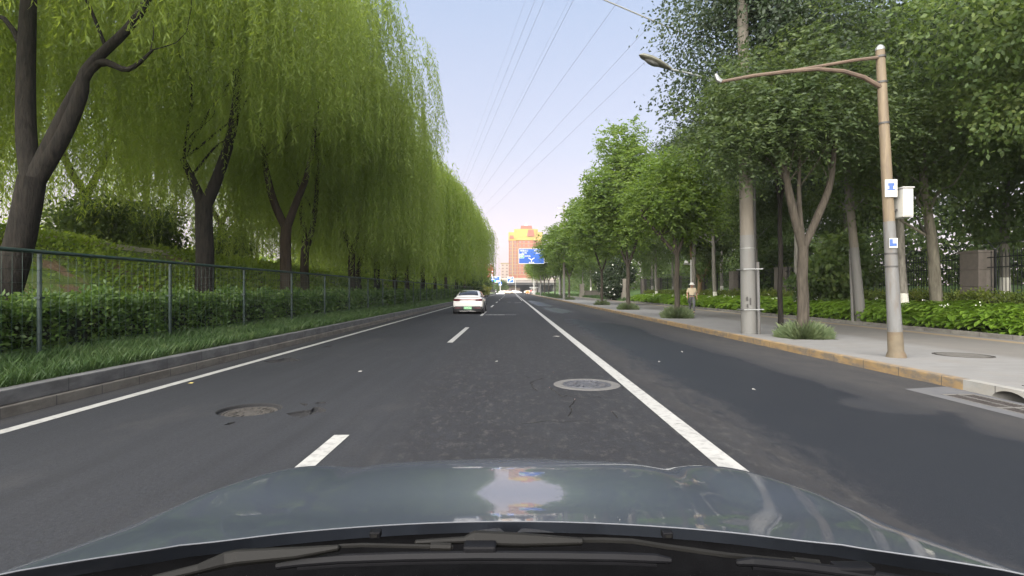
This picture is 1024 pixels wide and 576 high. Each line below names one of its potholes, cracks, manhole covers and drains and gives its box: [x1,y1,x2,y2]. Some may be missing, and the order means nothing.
drain grate [942,394,1024,414]
manhole cover [554,379,621,391]
manhole cover [215,403,283,417]
crack [524,372,618,424]
pothole [286,407,326,418]
